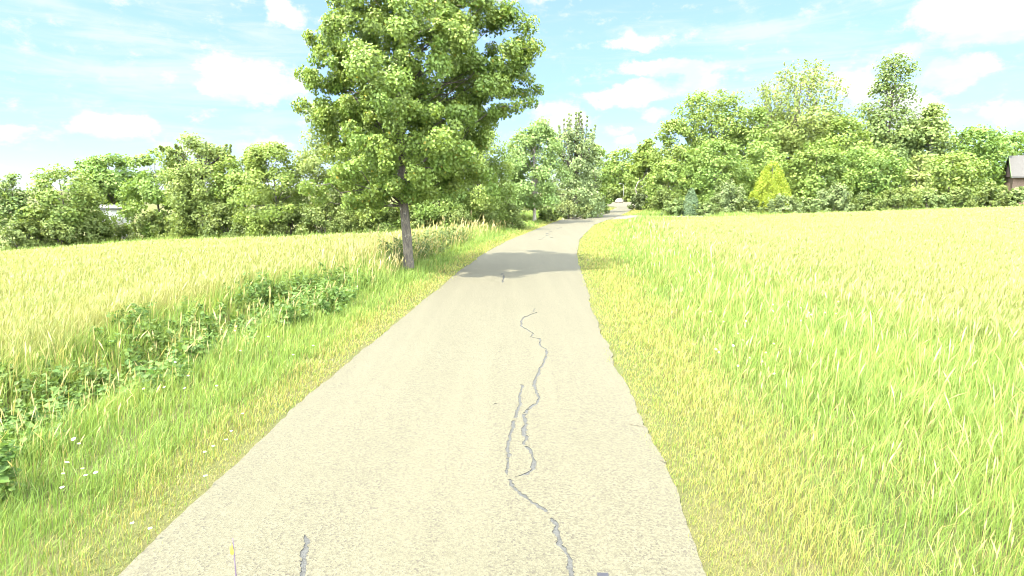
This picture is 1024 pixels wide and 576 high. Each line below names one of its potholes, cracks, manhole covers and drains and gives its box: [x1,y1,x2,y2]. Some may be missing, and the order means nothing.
crack [300,535,310,576]
crack [493,309,575,576]
